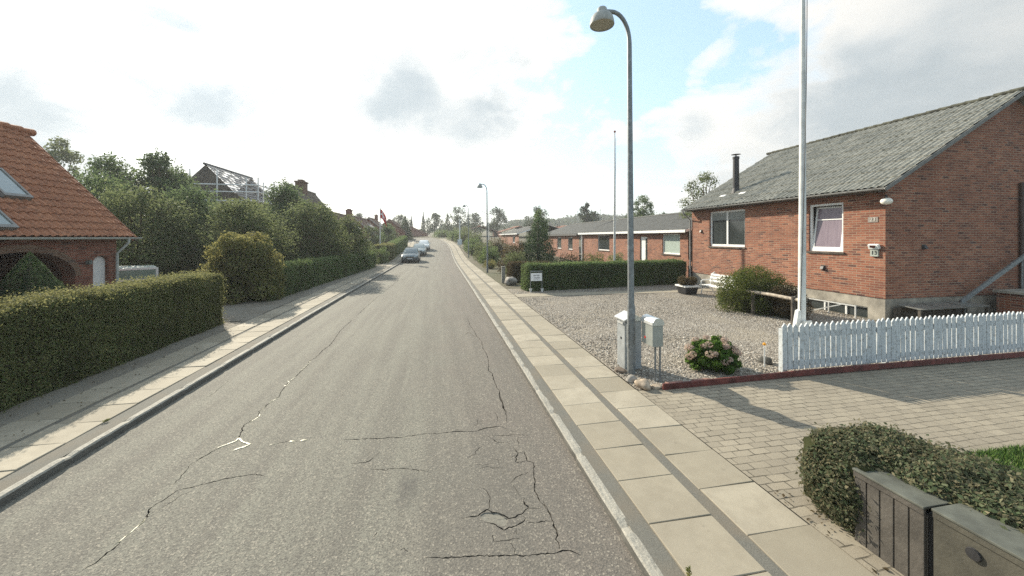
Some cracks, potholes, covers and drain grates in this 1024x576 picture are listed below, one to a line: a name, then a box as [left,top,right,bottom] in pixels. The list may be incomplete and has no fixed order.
crack [76,278,402,574]
crack [342,306,580,559]
